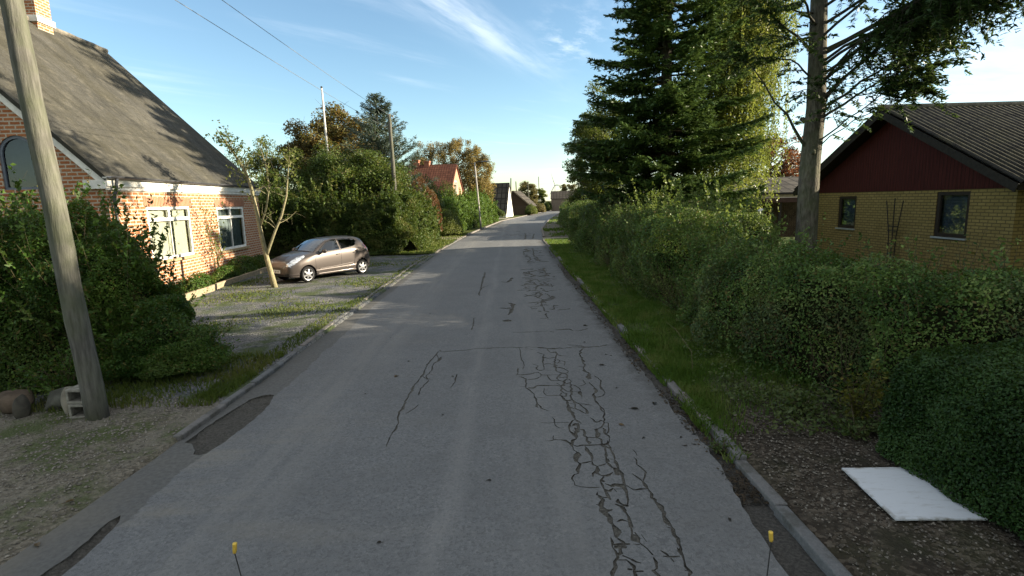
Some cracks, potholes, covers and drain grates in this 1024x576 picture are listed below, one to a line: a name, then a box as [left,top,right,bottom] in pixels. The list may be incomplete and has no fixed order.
crack [386,231,693,576]
pothole [185,394,274,455]
pothole [40,516,120,576]
